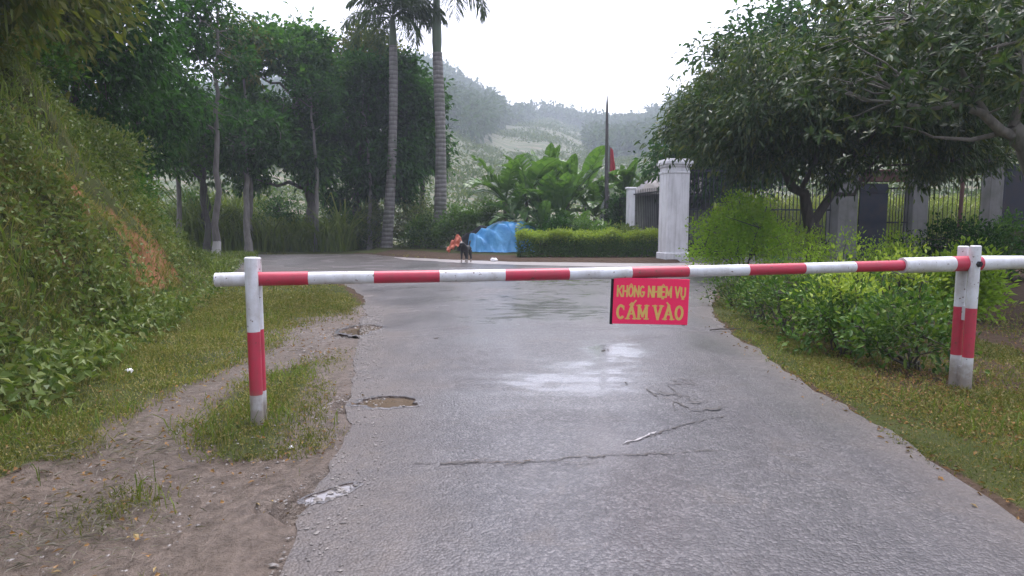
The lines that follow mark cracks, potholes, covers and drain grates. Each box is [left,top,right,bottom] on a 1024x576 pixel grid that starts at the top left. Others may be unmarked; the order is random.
crack [416,379,723,466]
pothole [297,481,364,505]
pothole [335,323,388,339]
pothole [346,395,423,410]
